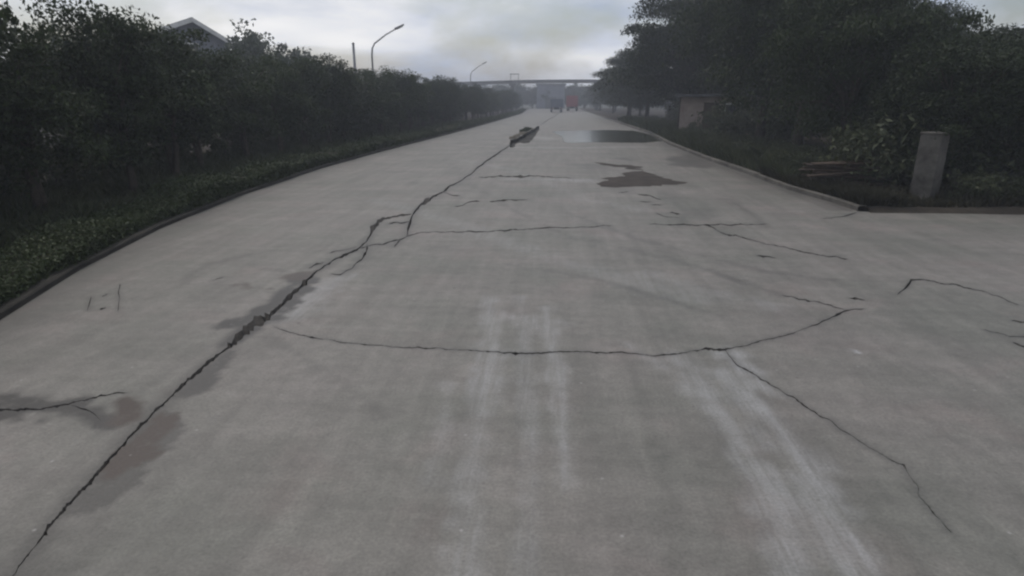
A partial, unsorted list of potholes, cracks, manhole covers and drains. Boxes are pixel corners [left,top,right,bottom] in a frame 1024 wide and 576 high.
pothole [509,126,540,148]
crack [0,147,951,576]
crack [898,279,1024,347]
